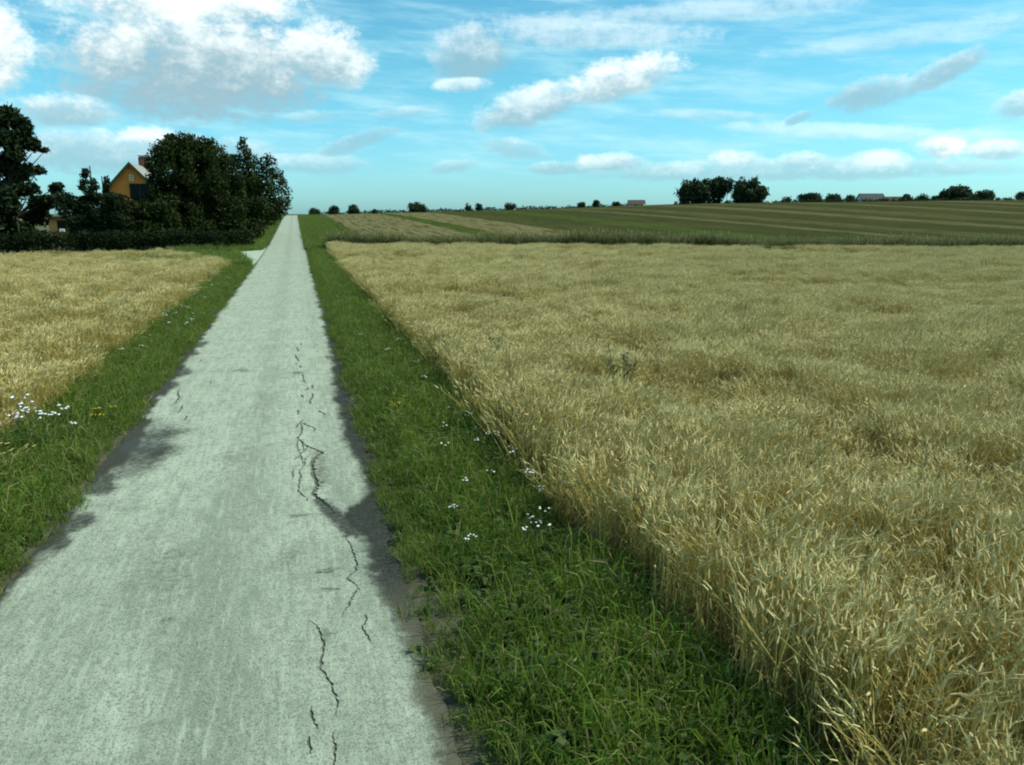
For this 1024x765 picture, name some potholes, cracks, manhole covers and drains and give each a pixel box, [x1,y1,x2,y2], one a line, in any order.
crack [292,330,336,514]
crack [306,534,371,765]
